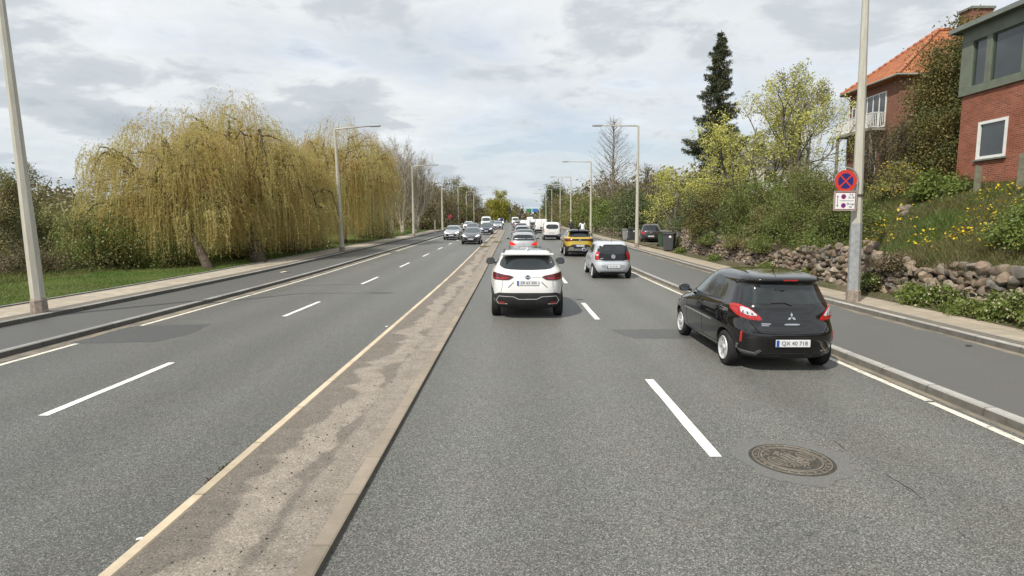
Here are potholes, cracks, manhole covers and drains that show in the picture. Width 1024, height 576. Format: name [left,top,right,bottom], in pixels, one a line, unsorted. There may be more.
manhole cover [729,438,854,488]
